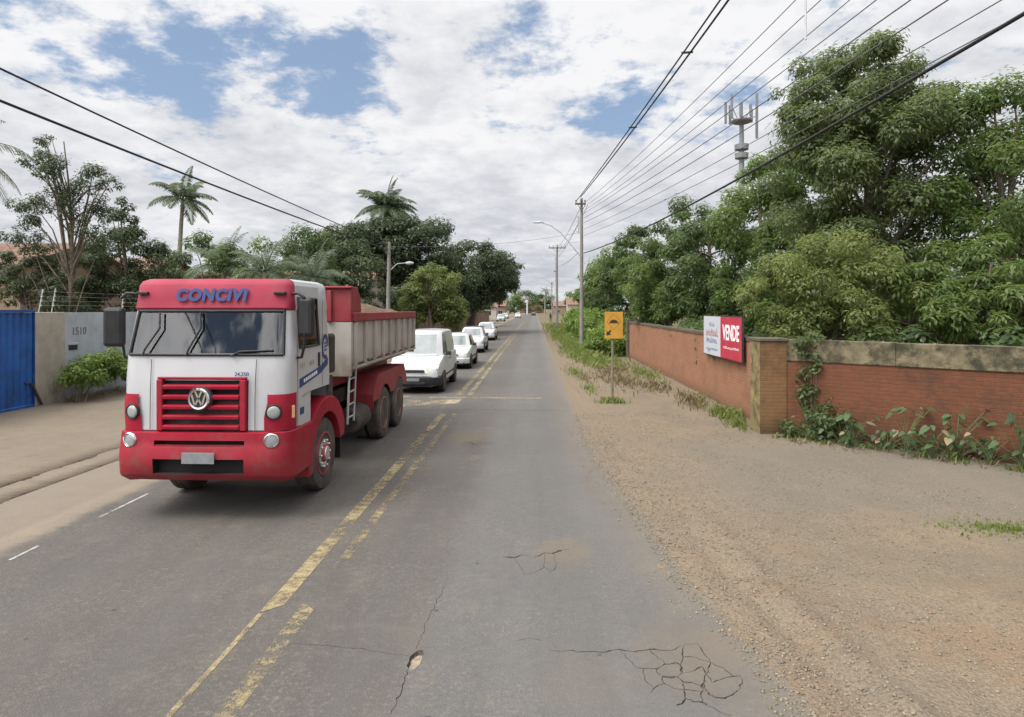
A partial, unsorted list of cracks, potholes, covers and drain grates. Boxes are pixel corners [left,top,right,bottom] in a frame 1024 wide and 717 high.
crack [507,549,570,573]
crack [570,647,743,715]
pothole [407,650,424,670]
crack [310,587,444,713]
